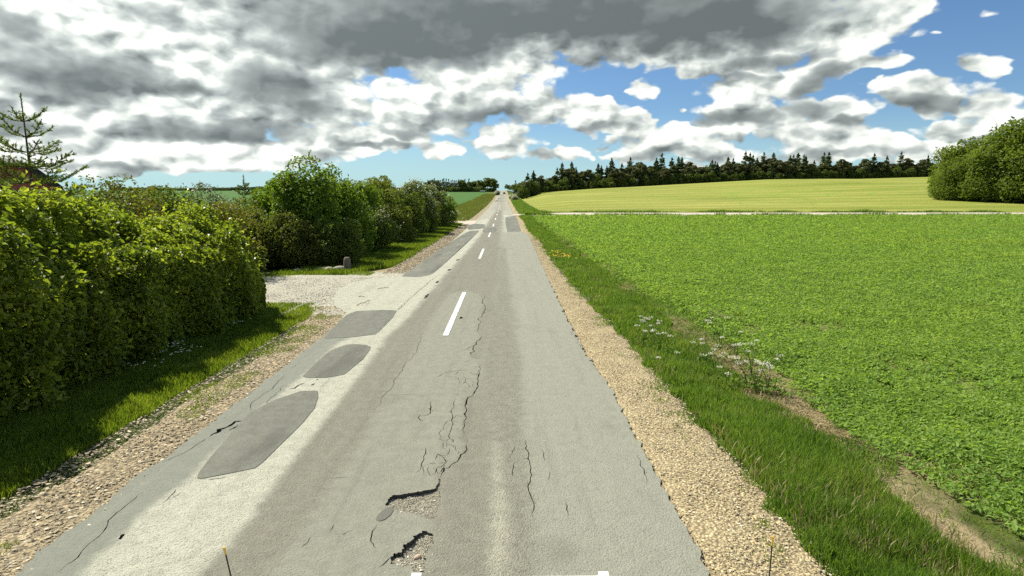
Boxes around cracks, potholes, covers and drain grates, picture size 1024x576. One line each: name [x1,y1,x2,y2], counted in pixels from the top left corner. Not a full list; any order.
crack [512,440,550,519]
crack [163,363,303,462]
pothole [390,531,447,573]
crack [374,300,486,479]
crack [56,491,144,574]
pothole [385,479,484,536]
